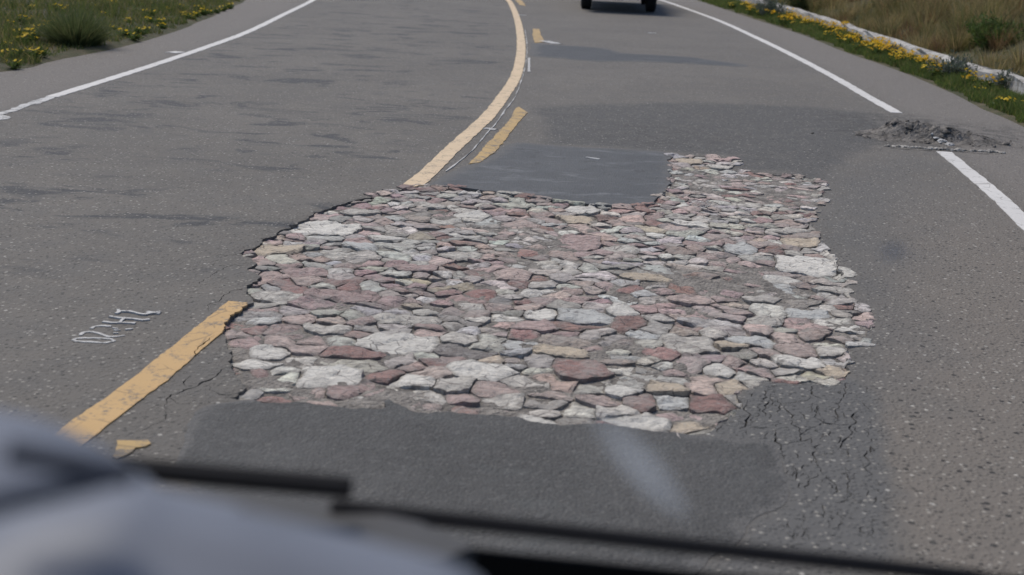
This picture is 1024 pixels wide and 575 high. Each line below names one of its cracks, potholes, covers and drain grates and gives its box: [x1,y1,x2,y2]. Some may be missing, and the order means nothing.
crack [716,382,893,541]
crack [142,367,234,431]
